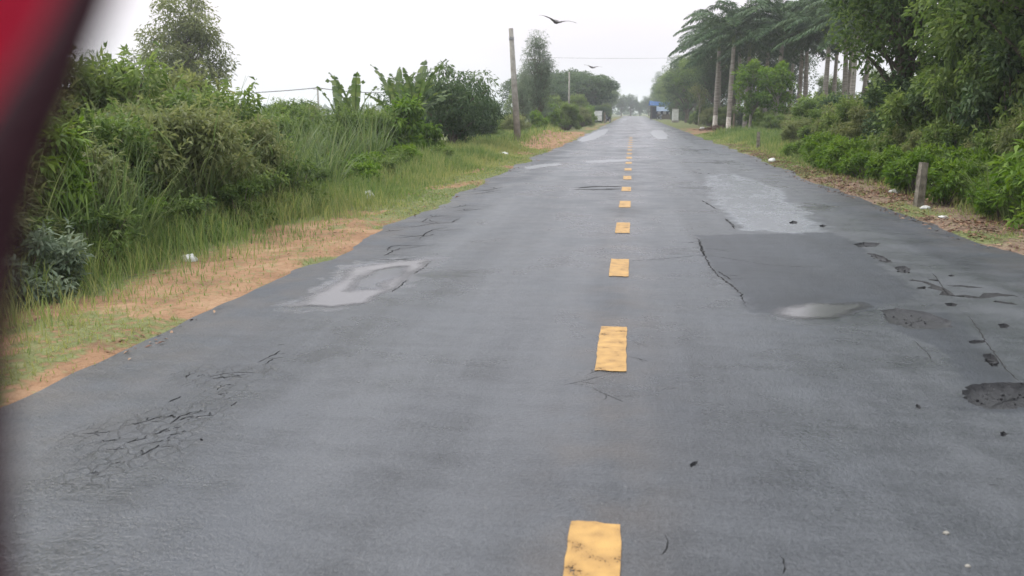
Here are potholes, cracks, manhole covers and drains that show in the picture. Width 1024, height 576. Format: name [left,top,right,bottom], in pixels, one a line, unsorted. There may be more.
pothole [962,382,1024,409]
crack [84,344,285,475]
crack [565,341,646,403]
crack [381,187,502,292]
pothole [983,353,999,367]
